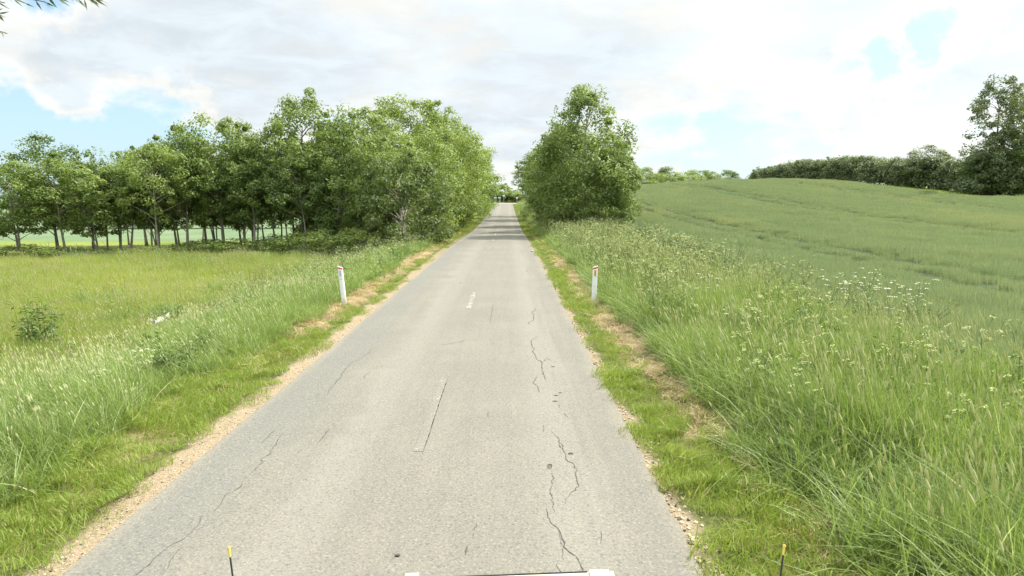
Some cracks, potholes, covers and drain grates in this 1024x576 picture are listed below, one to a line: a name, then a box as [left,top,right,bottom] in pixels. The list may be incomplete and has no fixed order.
crack [135,432,279,575]
crack [543,425,584,571]
